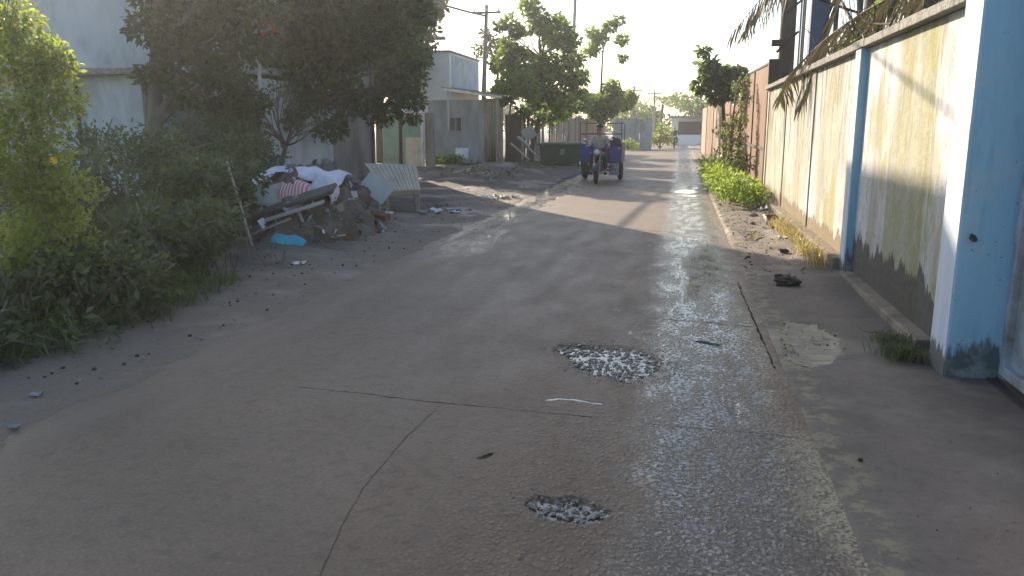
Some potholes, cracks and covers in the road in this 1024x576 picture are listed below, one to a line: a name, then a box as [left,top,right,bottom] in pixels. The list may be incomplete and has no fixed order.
pothole [497,482,635,539]
crack [653,268,776,369]
pothole [538,340,685,389]
crack [301,387,603,576]
